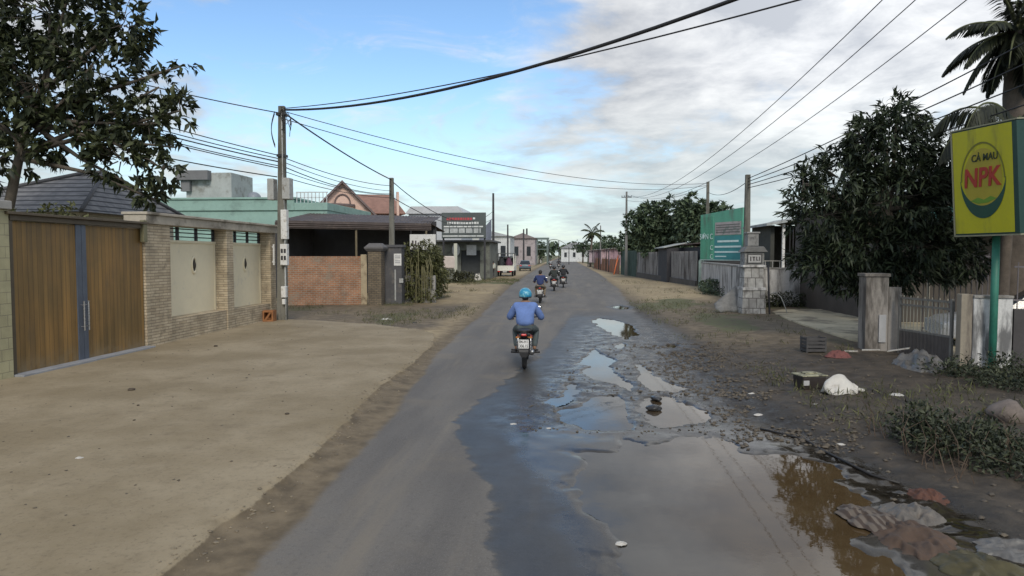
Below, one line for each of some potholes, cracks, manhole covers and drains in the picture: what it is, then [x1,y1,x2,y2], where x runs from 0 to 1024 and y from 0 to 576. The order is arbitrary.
pothole [546,382,588,408]
pothole [569,346,642,396]
pothole [634,364,698,394]
pothole [549,431,920,576]
pothole [632,393,719,429]
pothole [588,317,642,340]
